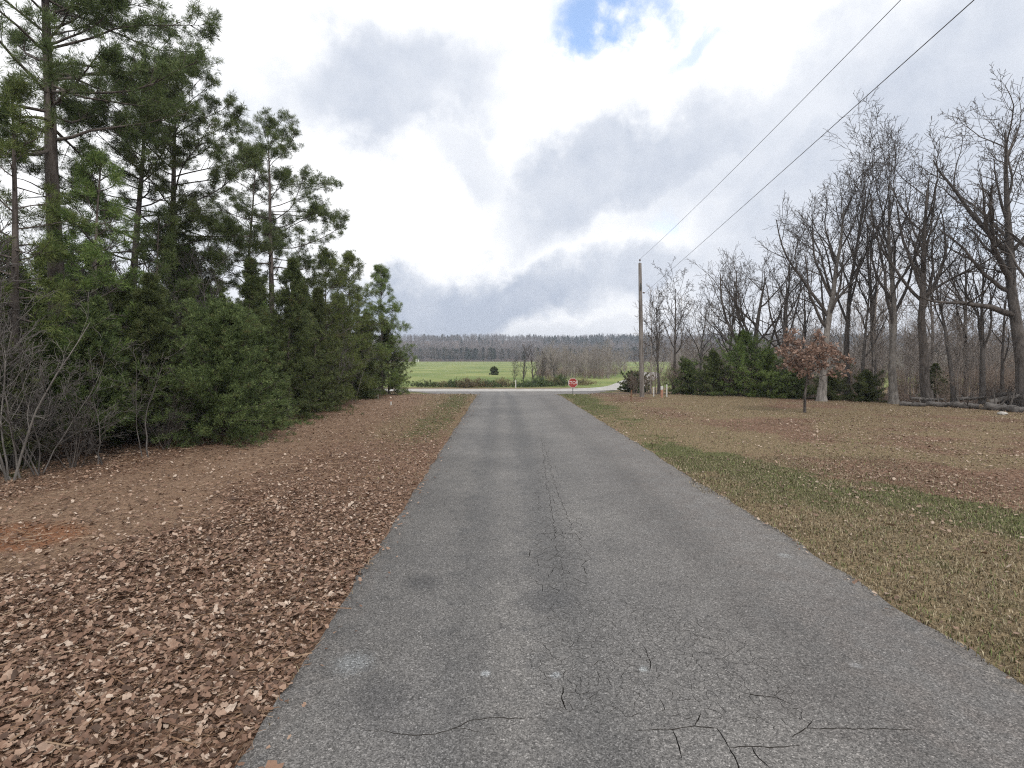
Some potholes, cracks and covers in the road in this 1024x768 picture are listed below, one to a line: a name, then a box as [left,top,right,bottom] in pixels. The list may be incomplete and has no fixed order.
crack [365,596,912,768]
crack [527,432,597,594]
